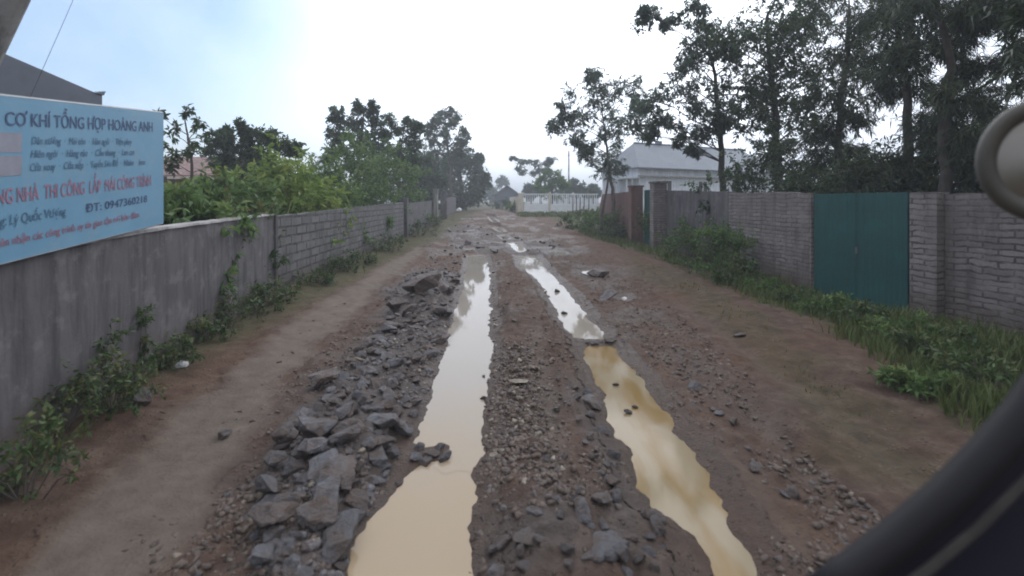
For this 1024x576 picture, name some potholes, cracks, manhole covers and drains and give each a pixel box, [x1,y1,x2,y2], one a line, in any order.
pothole [512,253,618,340]
pothole [391,254,506,474]
pothole [568,338,802,576]
pothole [505,240,531,253]
pothole [313,432,503,576]
